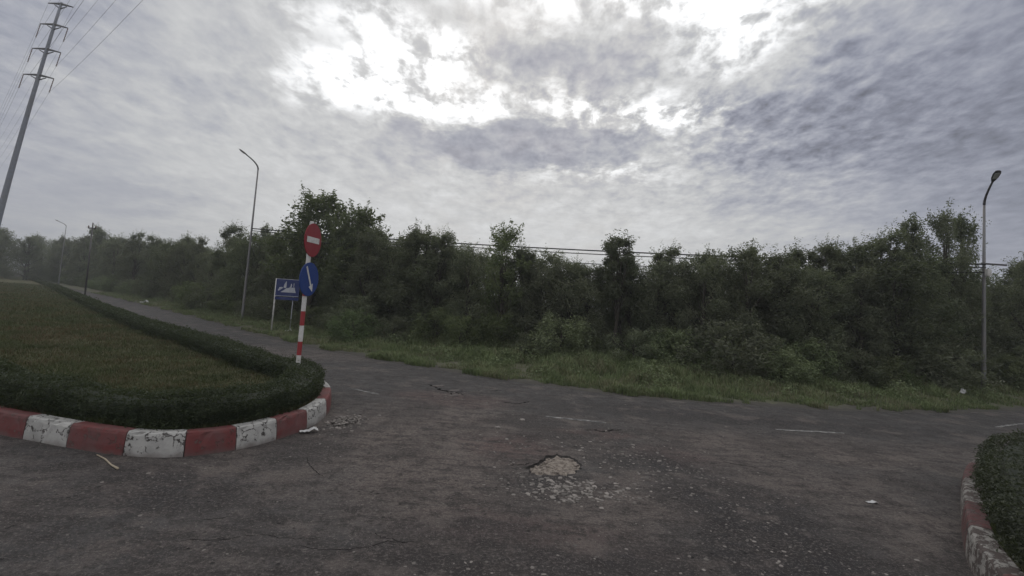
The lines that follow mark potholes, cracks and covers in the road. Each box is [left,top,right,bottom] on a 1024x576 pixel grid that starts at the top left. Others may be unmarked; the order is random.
crack [184,533,412,550]
pothole [526,454,582,476]
